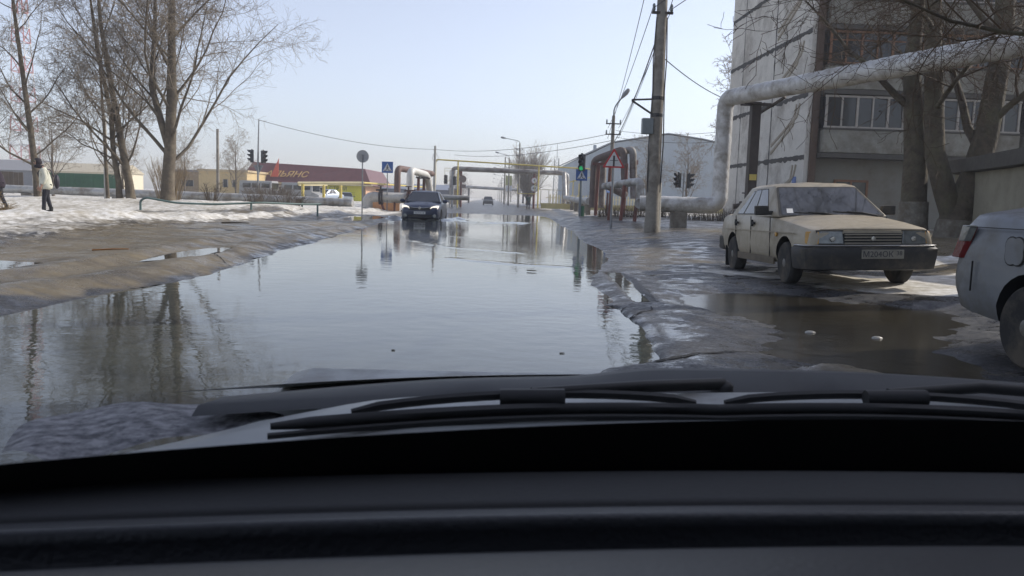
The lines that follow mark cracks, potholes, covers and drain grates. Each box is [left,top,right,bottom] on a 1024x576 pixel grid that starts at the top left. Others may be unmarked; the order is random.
crack [654,350,767,361]
